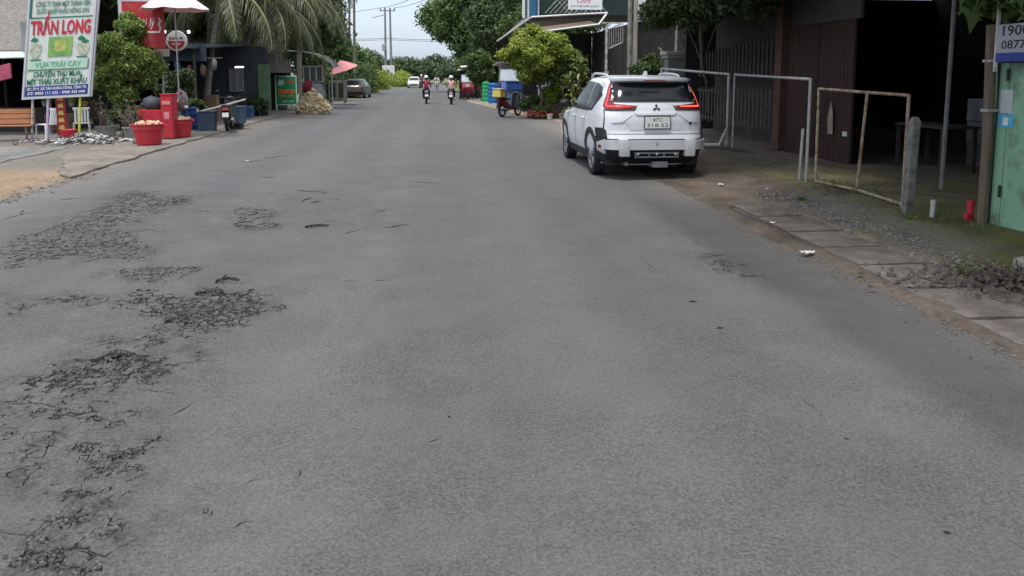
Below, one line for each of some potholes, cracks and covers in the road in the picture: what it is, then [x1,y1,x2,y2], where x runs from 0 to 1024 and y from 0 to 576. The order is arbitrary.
crack [0,266,287,576]
crack [233,207,281,230]
crack [3,192,208,268]
